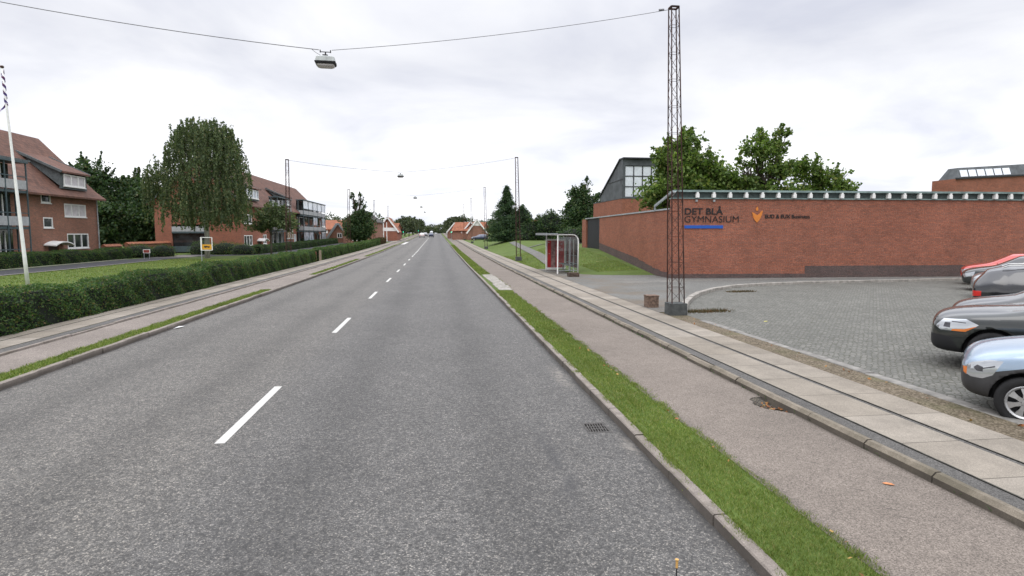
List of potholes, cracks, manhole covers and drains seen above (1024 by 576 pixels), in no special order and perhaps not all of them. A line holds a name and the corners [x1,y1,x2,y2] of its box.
drain grate [581,422,612,433]
pothole [749,396,784,412]
